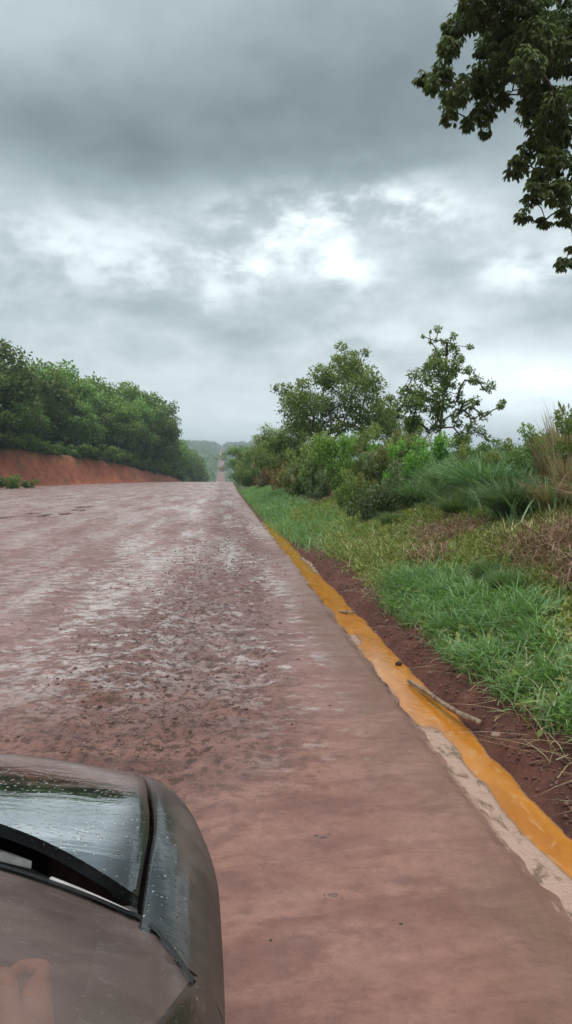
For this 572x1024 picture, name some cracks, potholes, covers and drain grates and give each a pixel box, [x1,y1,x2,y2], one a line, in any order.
pothole [324,891,343,900]
